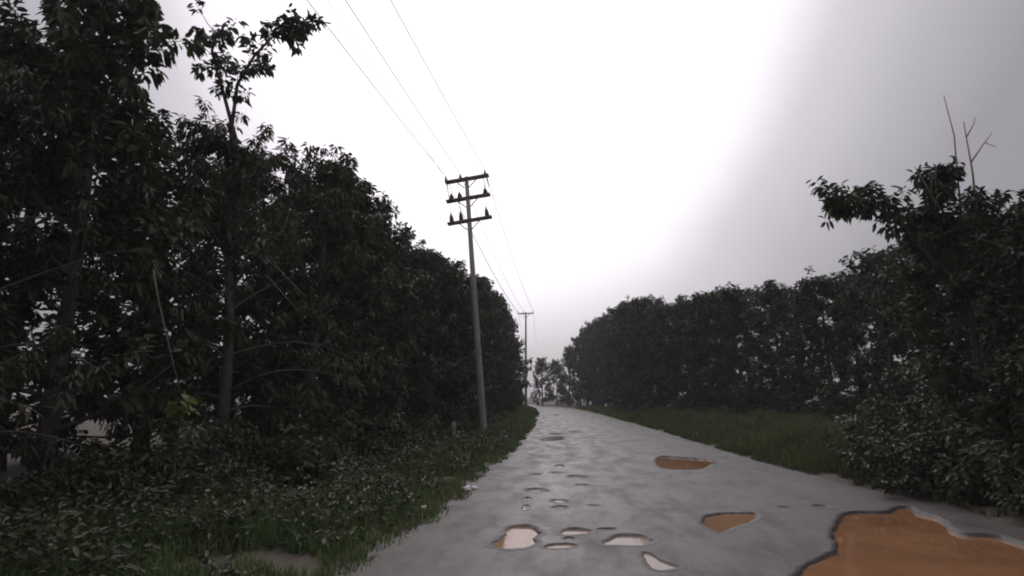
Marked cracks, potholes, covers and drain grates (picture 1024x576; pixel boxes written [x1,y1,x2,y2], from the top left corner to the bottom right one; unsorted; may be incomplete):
pothole [484,523,547,550]
pothole [784,505,1024,576]
pothole [595,532,661,547]
pothole [652,456,724,470]
pothole [637,551,686,572]
pothole [554,526,598,536]
pothole [696,511,763,533]
